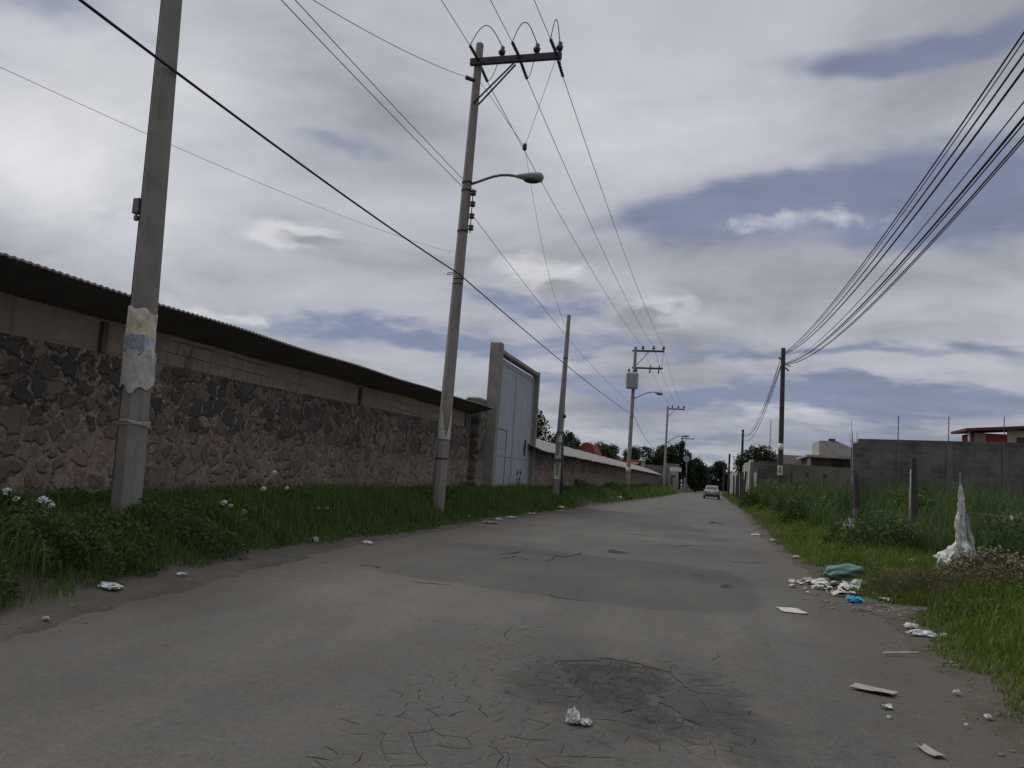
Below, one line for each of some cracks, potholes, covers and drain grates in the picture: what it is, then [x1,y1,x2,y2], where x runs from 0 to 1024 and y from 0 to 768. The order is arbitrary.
crack [305,596,615,768]
crack [498,551,584,562]
